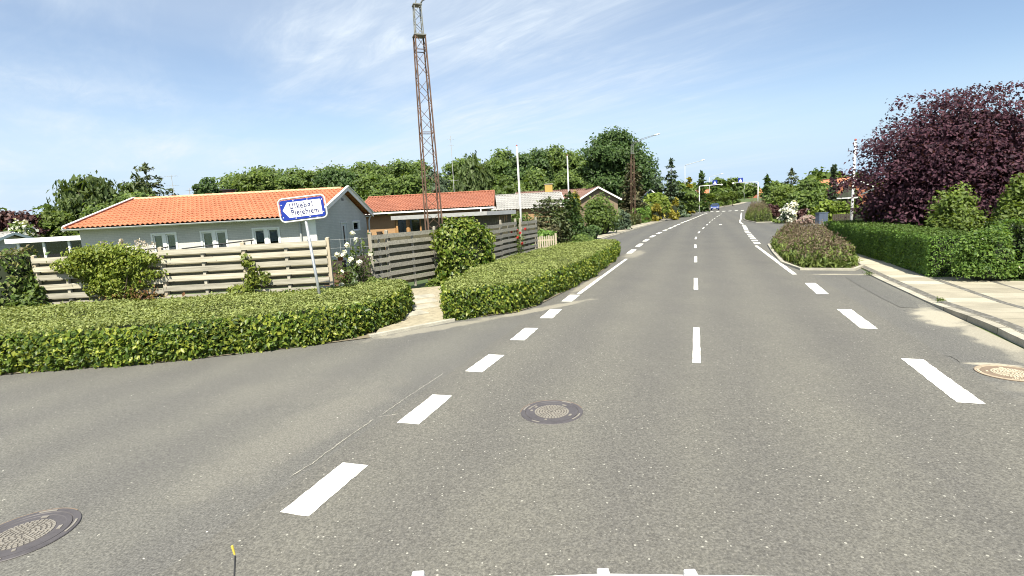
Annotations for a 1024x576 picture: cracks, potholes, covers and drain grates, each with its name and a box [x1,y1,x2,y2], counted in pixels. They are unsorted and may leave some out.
manhole cover [520,400,583,425]
manhole cover [0,508,82,562]
manhole cover [974,364,1024,382]
